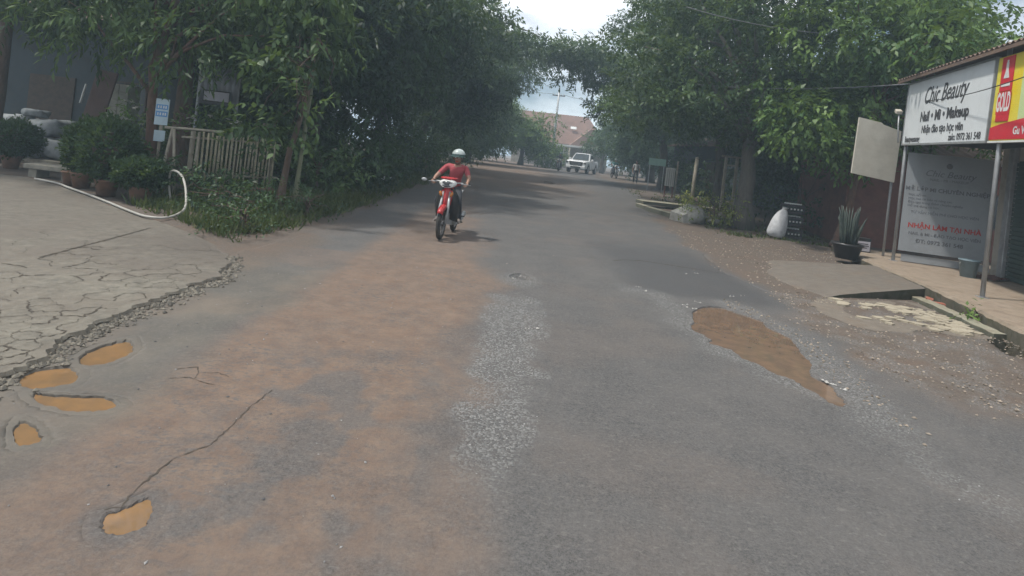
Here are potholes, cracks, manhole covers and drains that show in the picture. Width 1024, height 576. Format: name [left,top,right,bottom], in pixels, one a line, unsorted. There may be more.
crack [104,390,272,510]
pothole [3,362,92,393]
pothole [69,335,144,370]
pothole [685,305,856,411]
pothole [4,414,54,453]
pothole [18,390,133,416]
pothole [82,487,169,549]
